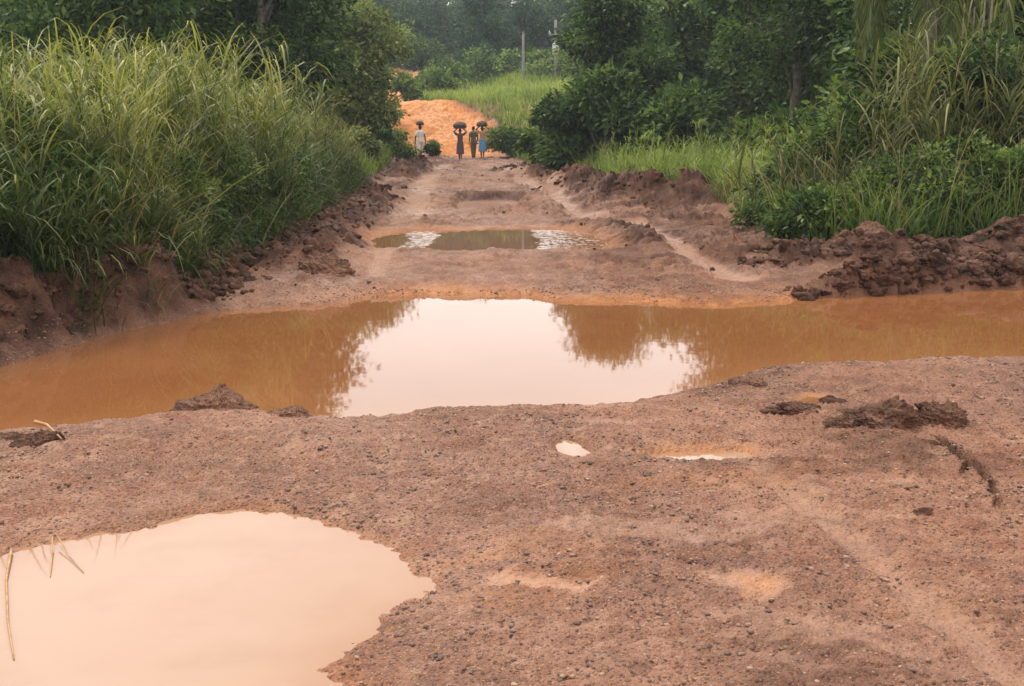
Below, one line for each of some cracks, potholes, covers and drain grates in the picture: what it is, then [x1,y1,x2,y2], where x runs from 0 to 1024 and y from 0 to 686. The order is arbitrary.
pothole [440,188,543,210]
pothole [0,252,1024,432]
pothole [357,221,625,251]
pothole [0,495,460,686]
pothole [623,436,781,460]
pothole [545,431,604,457]
